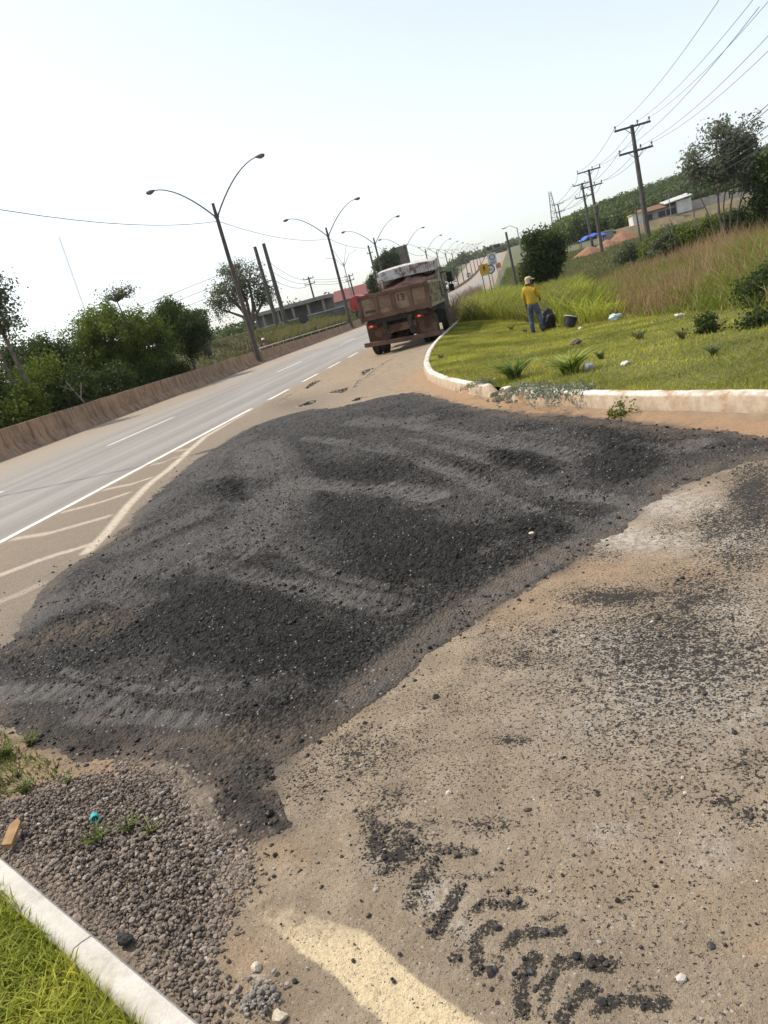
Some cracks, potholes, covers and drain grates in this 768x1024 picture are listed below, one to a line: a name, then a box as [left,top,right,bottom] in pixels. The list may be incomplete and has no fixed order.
crack [347,359,393,390]
